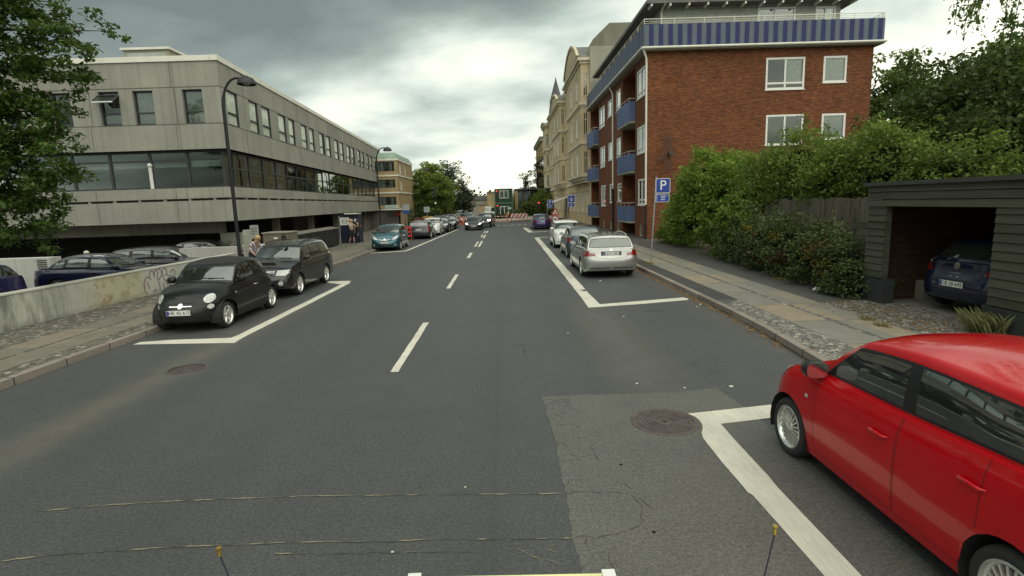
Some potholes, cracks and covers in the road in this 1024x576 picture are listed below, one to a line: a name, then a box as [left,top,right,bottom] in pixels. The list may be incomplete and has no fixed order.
crack [3,397,654,573]
manhole cover [163,363,210,375]
manhole cover [630,409,700,436]
